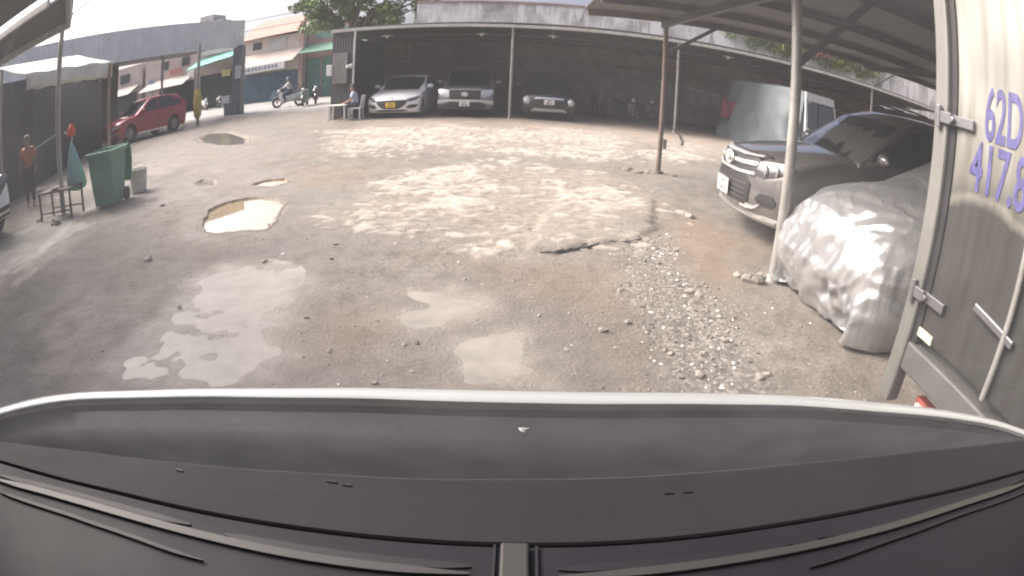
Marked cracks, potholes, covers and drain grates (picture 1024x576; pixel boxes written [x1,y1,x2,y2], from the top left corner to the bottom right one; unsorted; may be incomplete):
crack [540,239,641,253]
pothole [198,196,289,235]
pothole [196,131,252,147]
